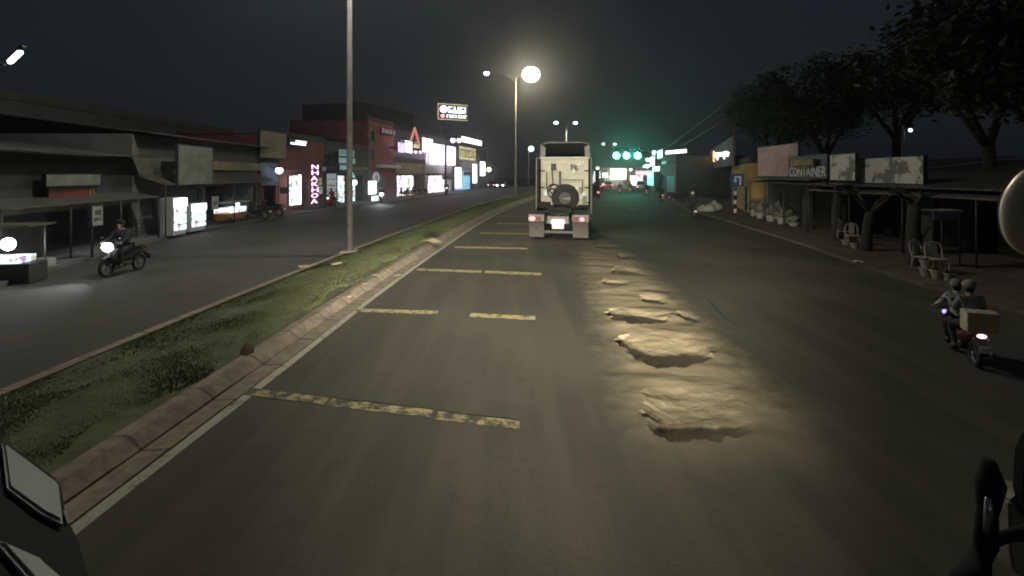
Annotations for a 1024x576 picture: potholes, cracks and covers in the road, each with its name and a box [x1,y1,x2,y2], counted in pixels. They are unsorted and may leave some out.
pothole [675,310,701,323]
pothole [638,293,671,305]
pothole [611,265,642,274]
pothole [617,252,636,260]
pothole [638,370,763,443]
pothole [614,326,720,369]
crack [704,296,740,327]
pothole [604,306,676,324]
pothole [602,276,630,286]
